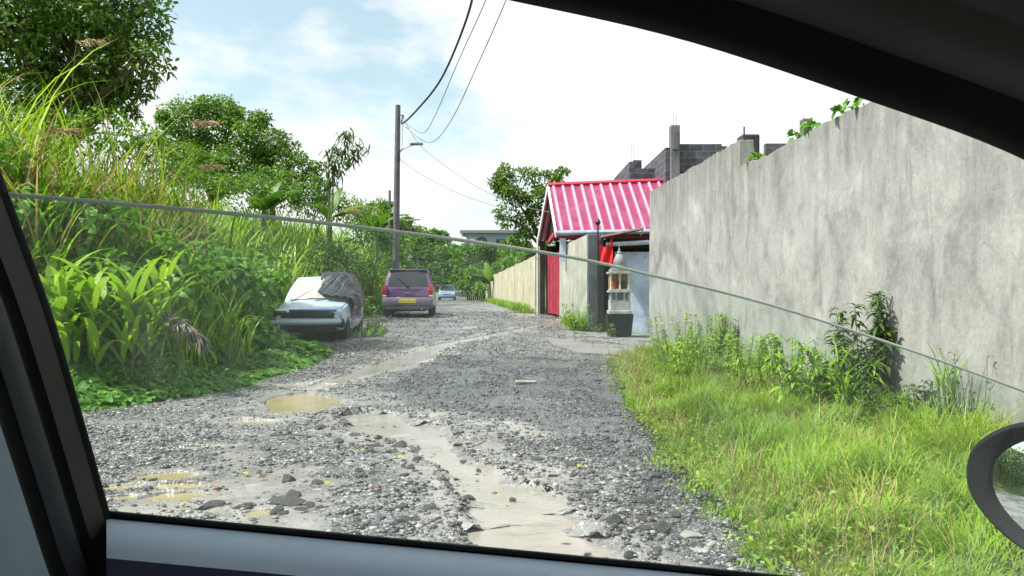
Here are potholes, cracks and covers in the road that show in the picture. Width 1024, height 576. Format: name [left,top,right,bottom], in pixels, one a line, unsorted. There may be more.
pothole [136,490,212,501]
pothole [142,480,214,489]
pothole [132,470,202,480]
pothole [256,390,345,415]
